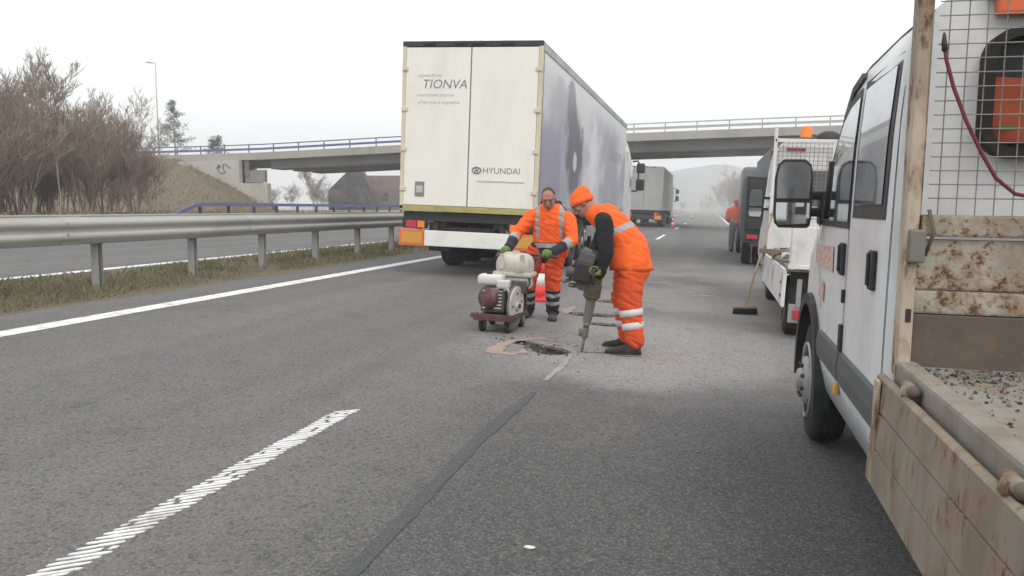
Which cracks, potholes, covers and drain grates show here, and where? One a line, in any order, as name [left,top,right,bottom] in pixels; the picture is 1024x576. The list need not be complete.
pothole [515,341,571,355]
